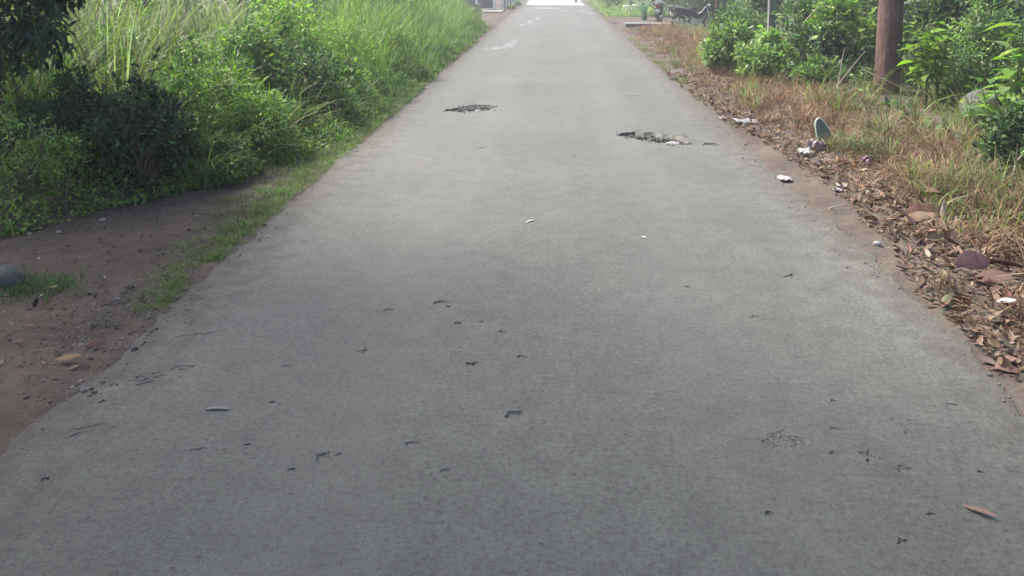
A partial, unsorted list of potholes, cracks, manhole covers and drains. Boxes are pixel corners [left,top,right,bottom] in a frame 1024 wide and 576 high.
pothole [611,130,701,146]
pothole [441,104,498,113]
pothole [761,429,810,451]
